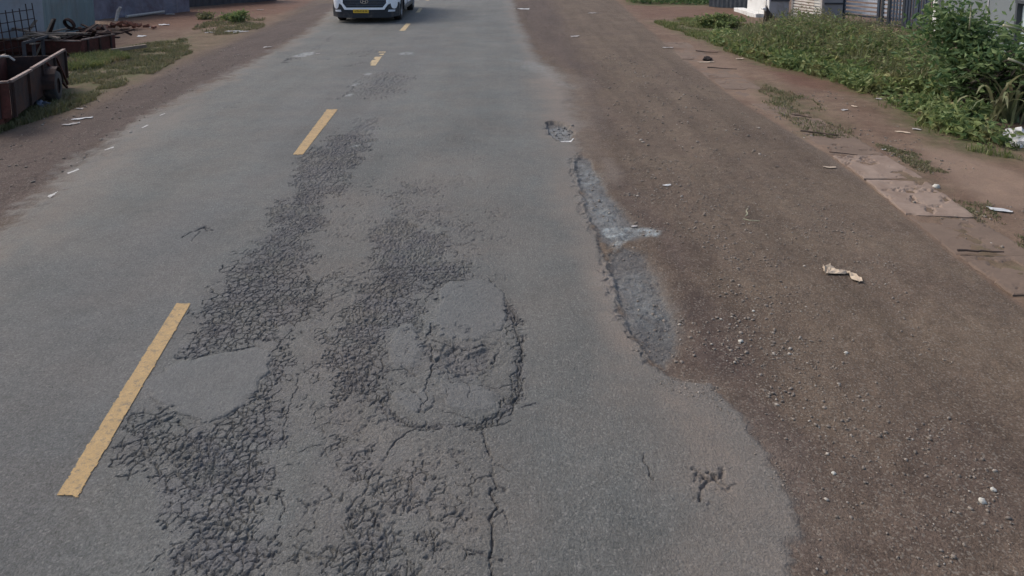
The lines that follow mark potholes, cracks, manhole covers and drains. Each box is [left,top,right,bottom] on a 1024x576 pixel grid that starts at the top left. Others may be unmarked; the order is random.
crack [109,102,537,576]
crack [642,453,655,481]
pothole [545,120,578,142]
crack [693,466,739,503]
